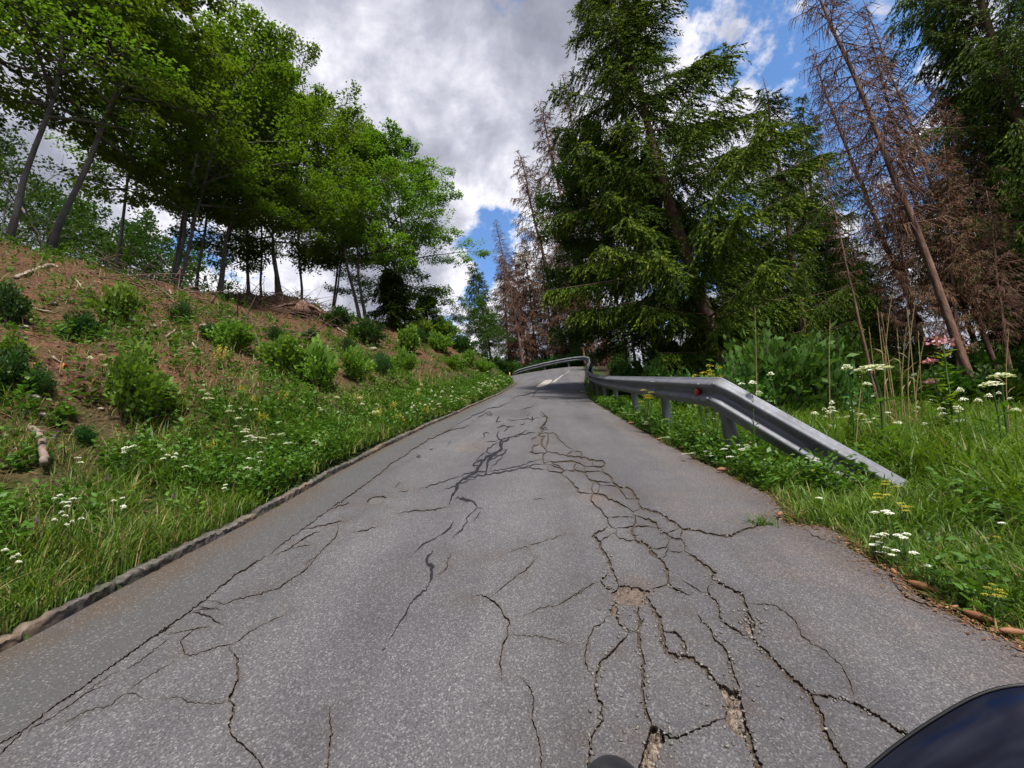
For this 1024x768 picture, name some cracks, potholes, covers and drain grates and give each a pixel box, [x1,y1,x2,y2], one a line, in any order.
pothole [610,585,650,616]
pothole [638,725,665,768]
crack [476,412,908,768]
crack [66,521,378,768]
pothole [717,683,747,738]
